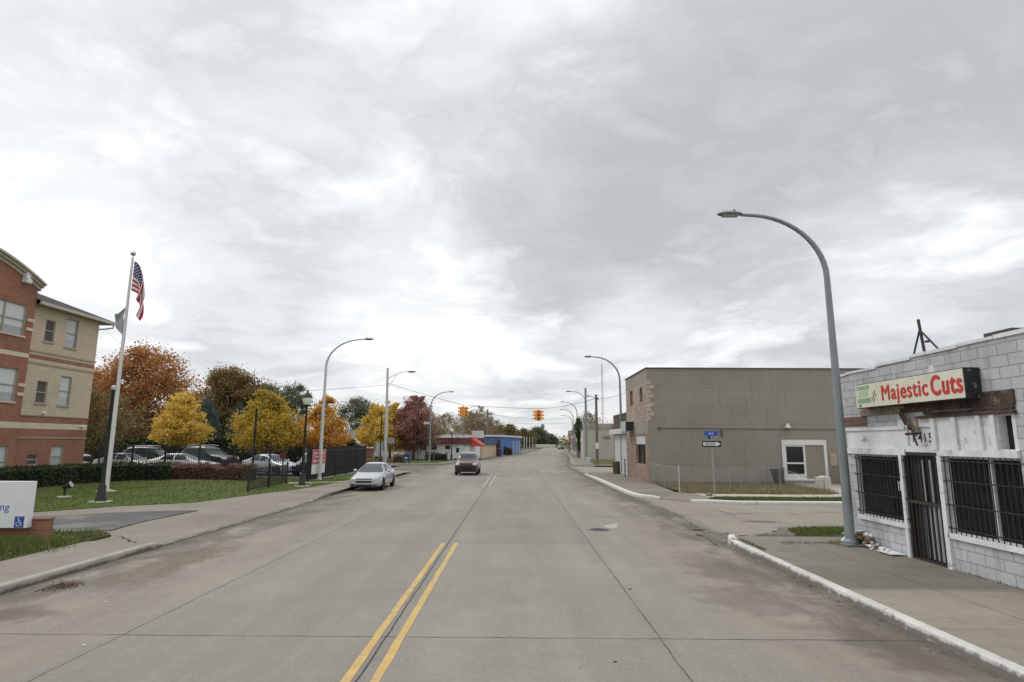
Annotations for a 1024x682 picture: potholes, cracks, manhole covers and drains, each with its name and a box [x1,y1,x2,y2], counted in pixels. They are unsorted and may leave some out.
drain grate [702,533,730,544]
